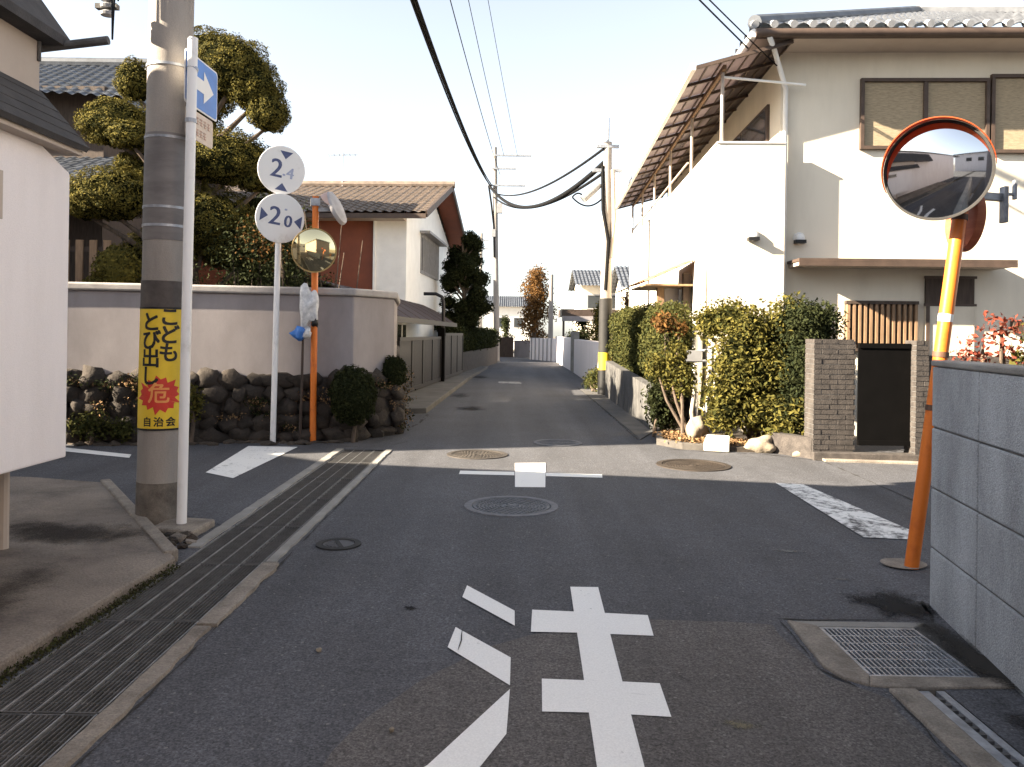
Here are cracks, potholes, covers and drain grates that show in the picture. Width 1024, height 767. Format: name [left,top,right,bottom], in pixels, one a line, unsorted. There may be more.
drain grate [235,498,331,527]
drain grate [100,563,261,621]
manhole cover [534,439,582,447]
manhole cover [447,449,508,460]
manhole cover [656,459,731,472]
drain grate [274,478,354,500]
drain grate [181,525,302,565]
drain grate [304,462,371,479]
manhole cover [316,538,361,551]
drain grate [0,619,199,715]
drain grate [0,713,98,767]
manhole cover [464,496,558,517]
